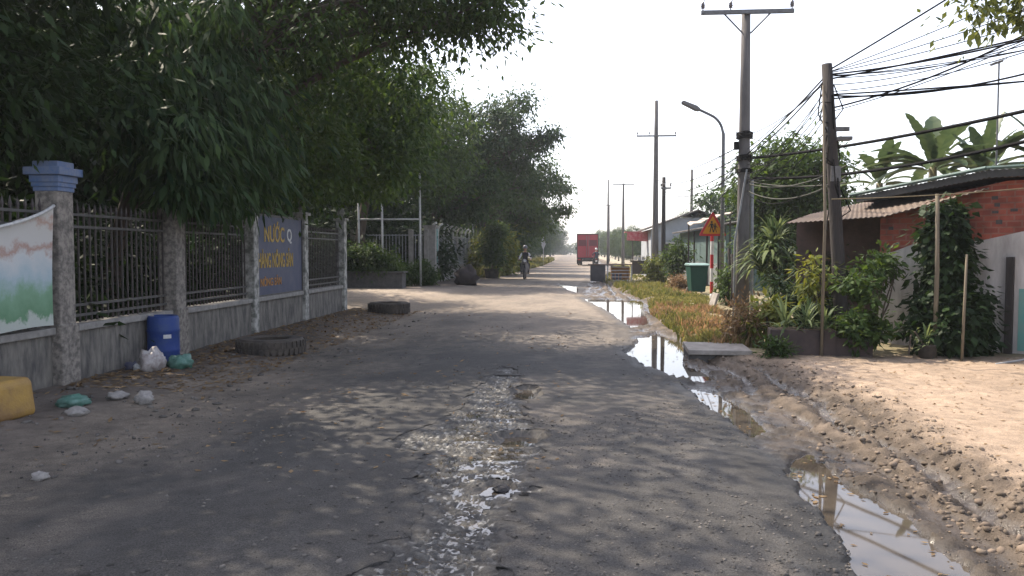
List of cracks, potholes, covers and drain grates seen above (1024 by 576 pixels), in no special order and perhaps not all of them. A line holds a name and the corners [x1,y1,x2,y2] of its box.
pothole [466,478,521,498]
pothole [506,385,543,399]
pothole [487,429,548,449]
